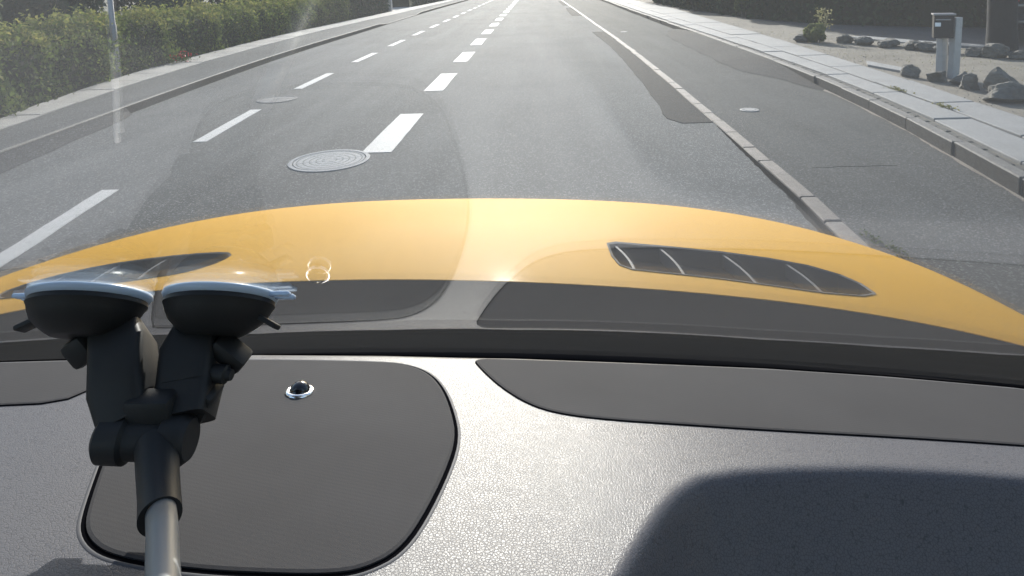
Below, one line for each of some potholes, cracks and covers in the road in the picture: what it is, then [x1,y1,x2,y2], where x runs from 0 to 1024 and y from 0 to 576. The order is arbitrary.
manhole cover [288,149,370,172]
